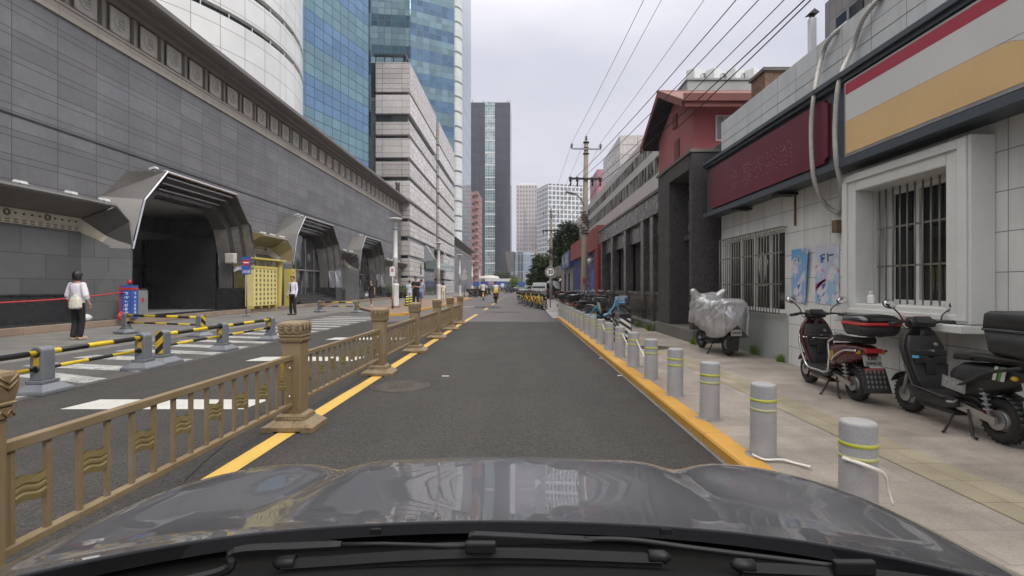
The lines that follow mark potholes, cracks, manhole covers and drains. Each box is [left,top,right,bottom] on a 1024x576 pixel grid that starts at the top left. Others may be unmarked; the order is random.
manhole cover [370,380,430,392]
